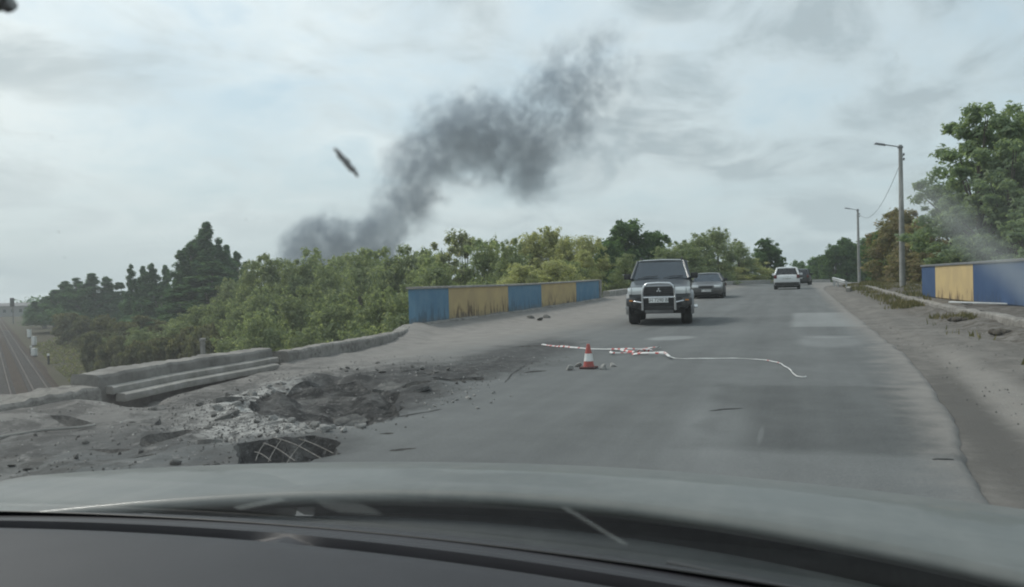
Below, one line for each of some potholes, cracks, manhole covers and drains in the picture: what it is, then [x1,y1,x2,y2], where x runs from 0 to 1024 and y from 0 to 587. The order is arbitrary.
pothole [249,381,406,426]
pothole [233,435,341,464]
pothole [50,415,97,427]
